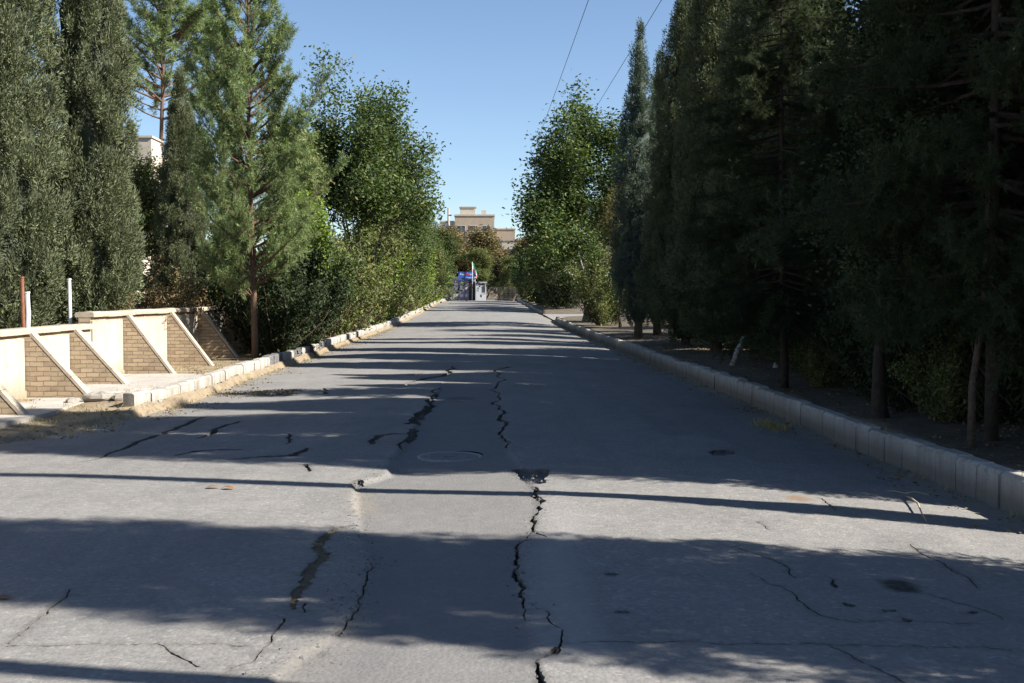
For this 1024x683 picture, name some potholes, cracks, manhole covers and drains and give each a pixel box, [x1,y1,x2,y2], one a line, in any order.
crack [83,417,312,472]
crack [566,641,1013,683]
crack [367,366,456,451]
manhole cover [417,451,483,462]
pothole [511,468,550,484]
crack [6,525,373,677]
crack [739,544,1003,624]
crack [511,487,564,683]
